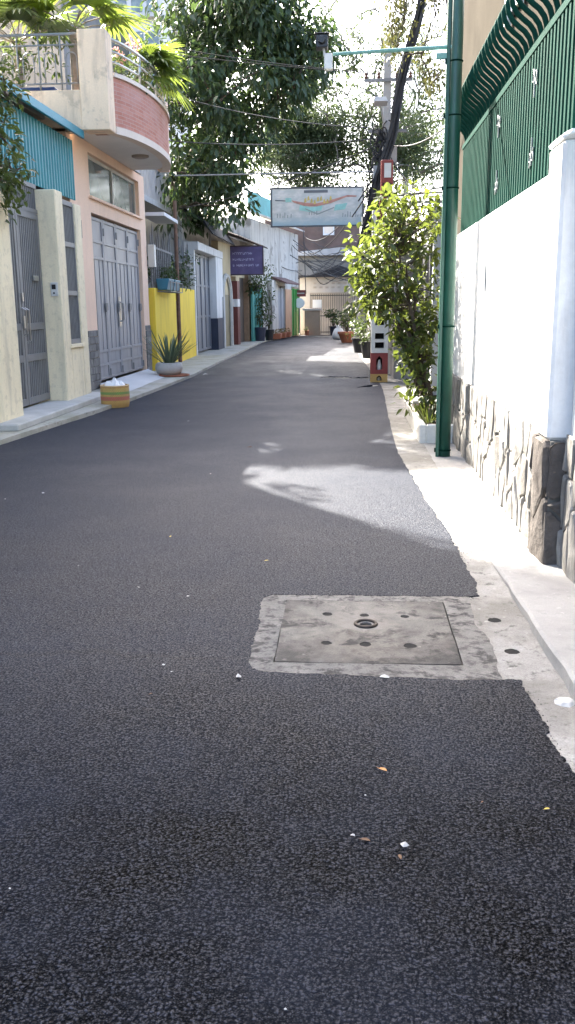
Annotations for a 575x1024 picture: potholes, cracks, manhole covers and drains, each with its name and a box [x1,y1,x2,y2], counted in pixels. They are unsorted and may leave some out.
manhole cover [249,595,503,680]
